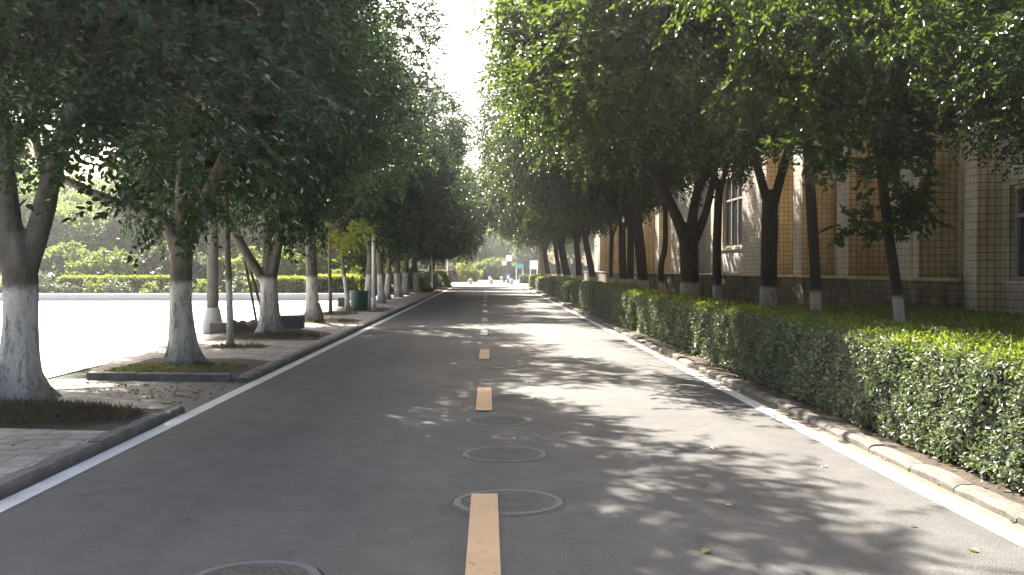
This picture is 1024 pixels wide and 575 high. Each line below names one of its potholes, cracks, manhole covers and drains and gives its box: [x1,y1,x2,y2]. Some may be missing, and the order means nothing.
manhole cover [465,415,534,426]
manhole cover [452,489,565,516]
manhole cover [460,446,548,463]
manhole cover [193,560,324,575]
